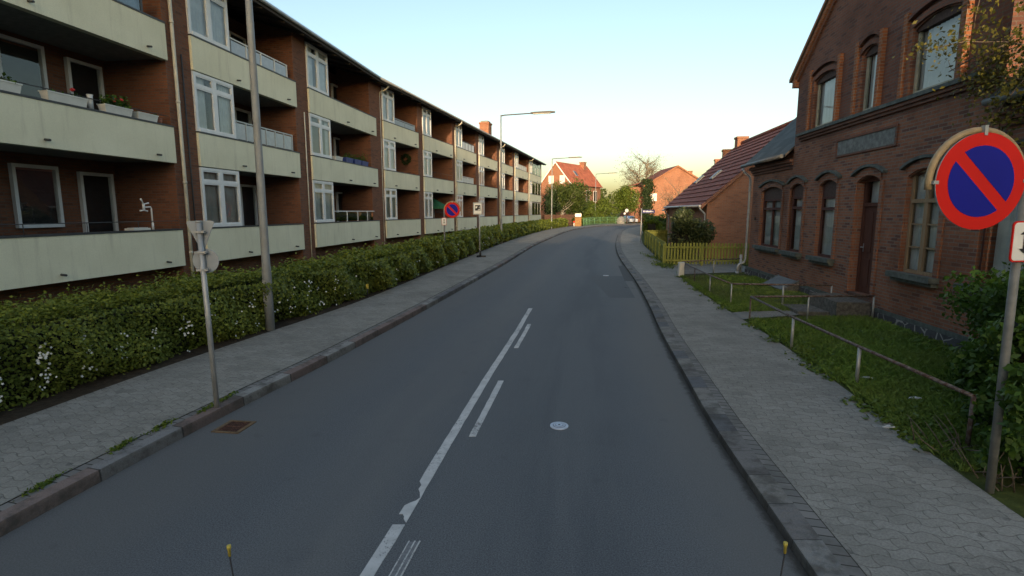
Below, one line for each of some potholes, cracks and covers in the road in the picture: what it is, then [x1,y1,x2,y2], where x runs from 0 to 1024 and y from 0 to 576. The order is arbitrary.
utility cover [550,422,568,430]
drain grate [211,420,257,434]
